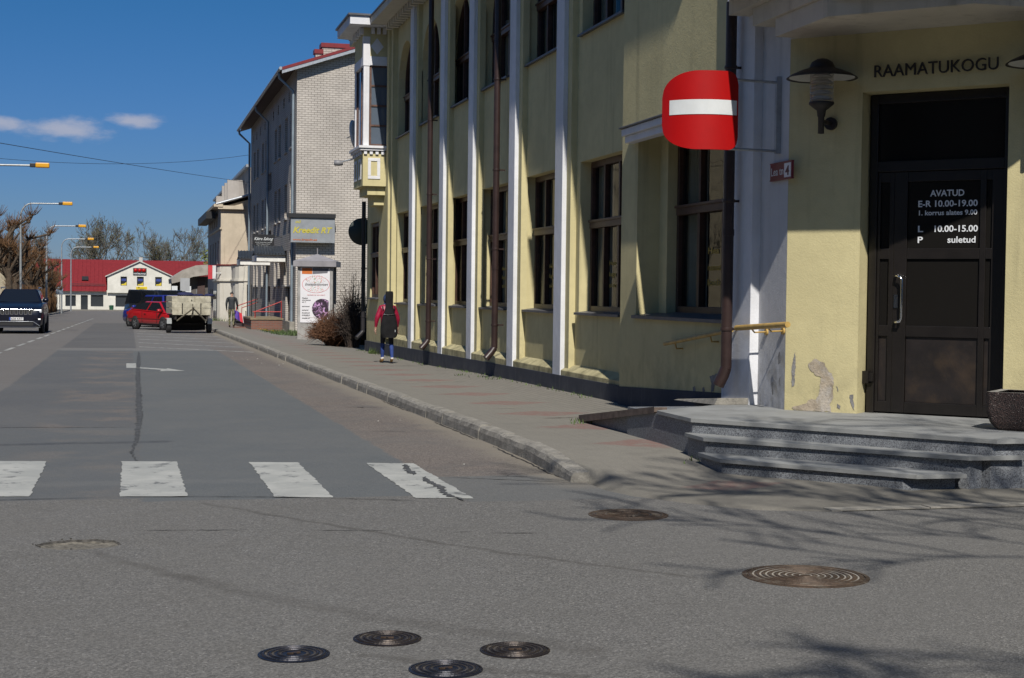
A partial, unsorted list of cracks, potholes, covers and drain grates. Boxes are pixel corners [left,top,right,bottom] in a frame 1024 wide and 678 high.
manhole cover [257,645,330,663]
manhole cover [408,659,483,678]
manhole cover [353,630,422,647]
manhole cover [480,641,550,659]
manhole cover [588,509,669,521]
manhole cover [742,565,870,588]
